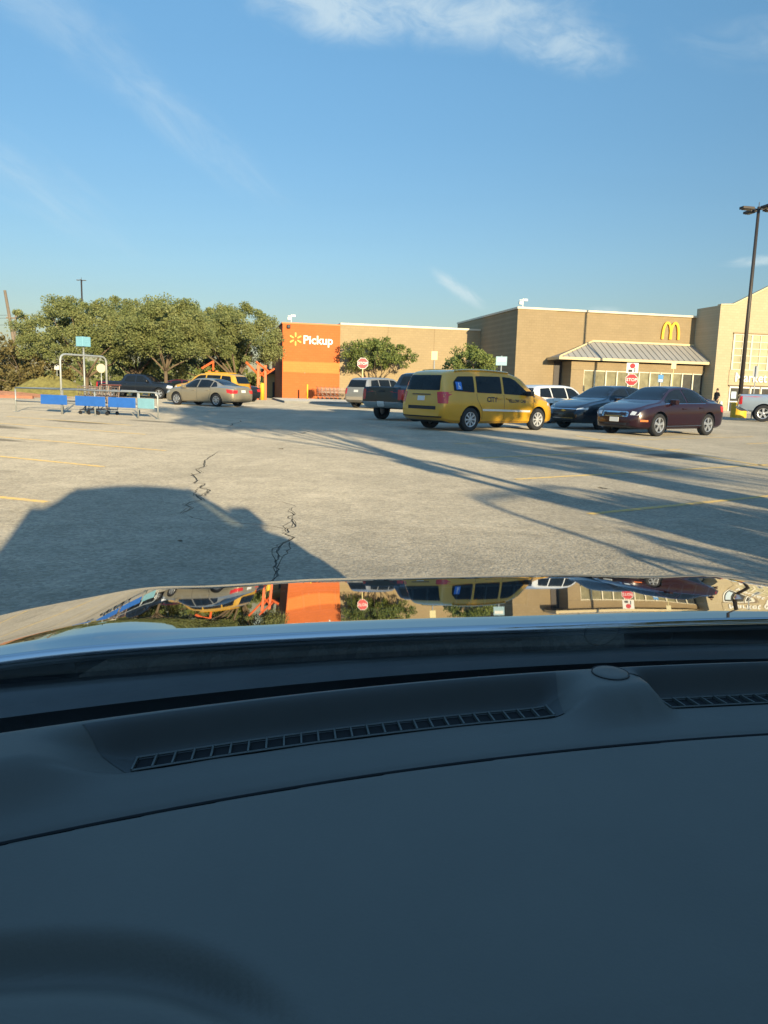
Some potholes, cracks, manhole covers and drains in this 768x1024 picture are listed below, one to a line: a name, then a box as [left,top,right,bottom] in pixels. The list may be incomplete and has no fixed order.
crack [153,452,283,529]
crack [271,501,296,581]
